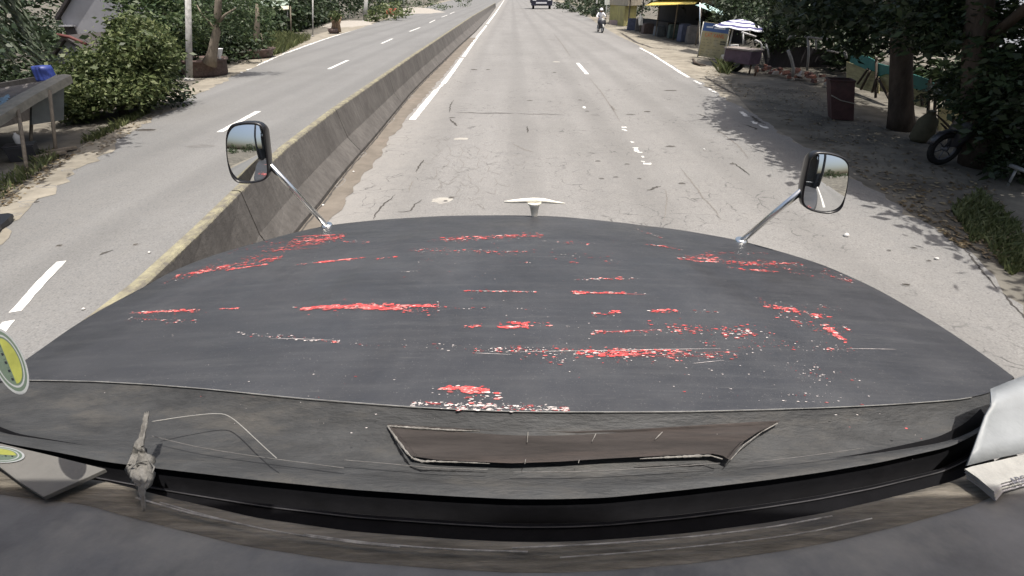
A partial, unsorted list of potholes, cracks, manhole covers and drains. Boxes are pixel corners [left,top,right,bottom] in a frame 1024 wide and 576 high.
crack [301,25,532,231]
crack [650,169,721,222]
